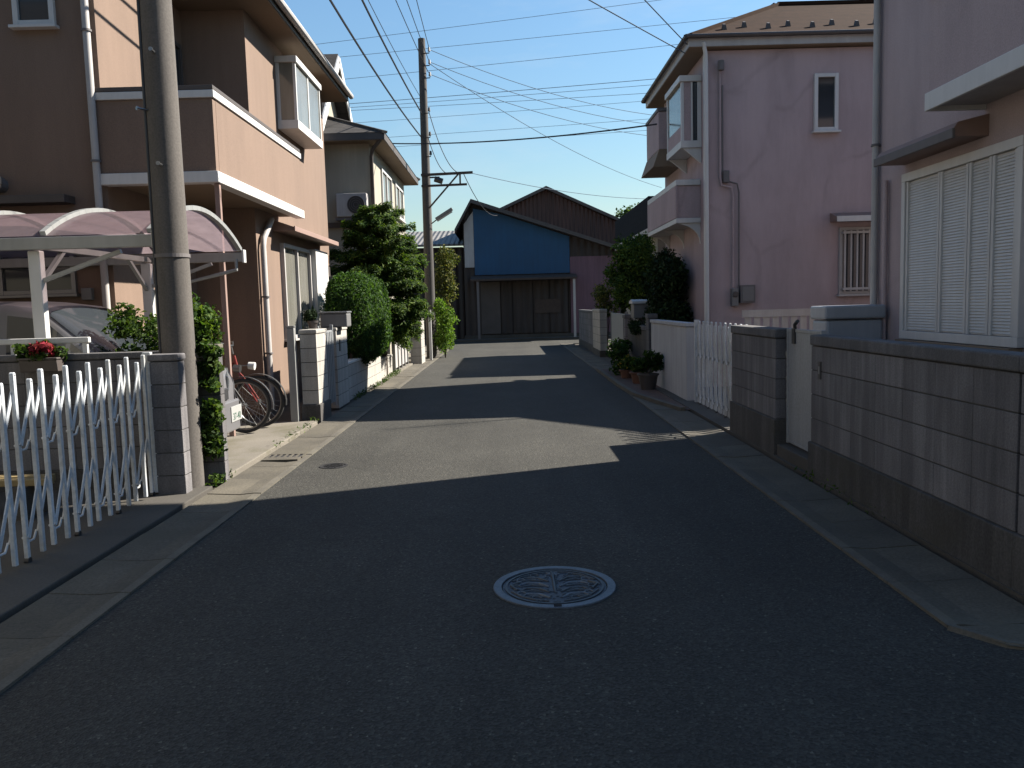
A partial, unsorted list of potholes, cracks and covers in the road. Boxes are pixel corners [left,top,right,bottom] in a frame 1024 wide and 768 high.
manhole cover [493,566,616,609]
